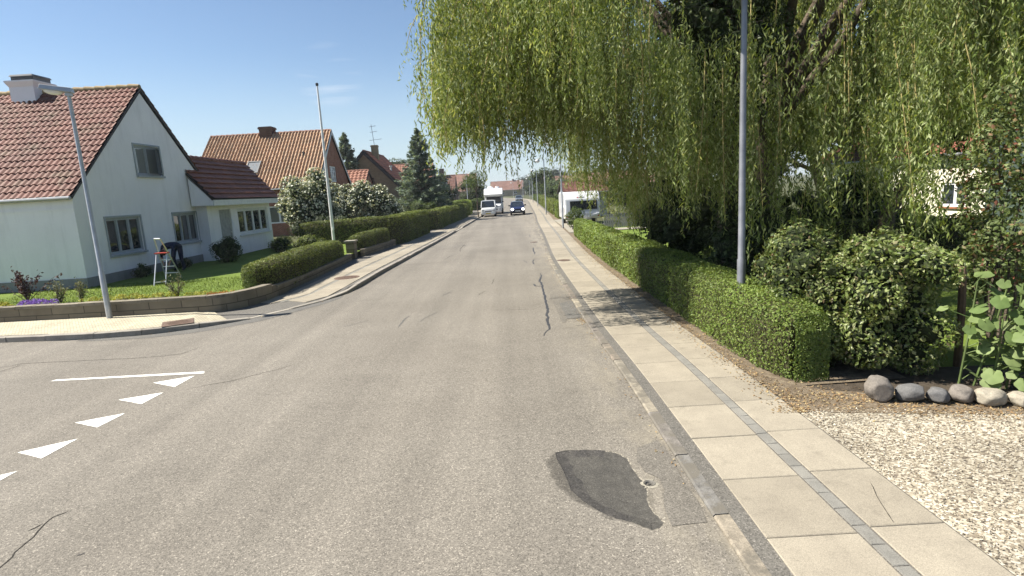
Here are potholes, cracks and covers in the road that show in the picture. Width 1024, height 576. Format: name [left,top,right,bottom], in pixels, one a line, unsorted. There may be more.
crack [0,511,68,567]
